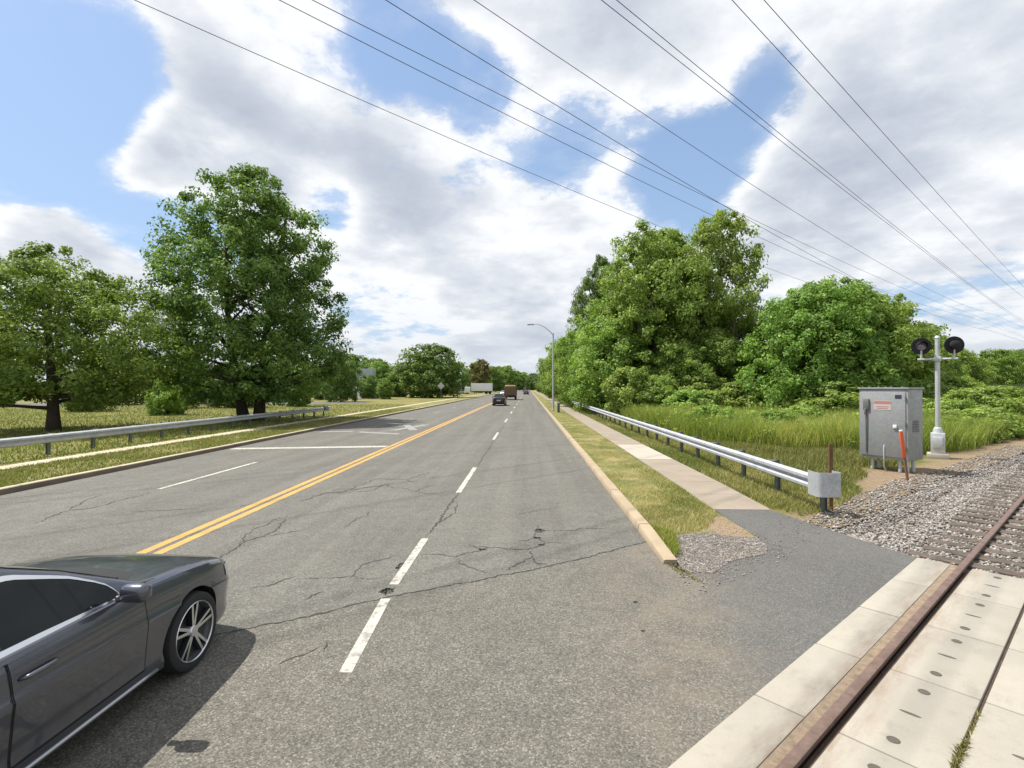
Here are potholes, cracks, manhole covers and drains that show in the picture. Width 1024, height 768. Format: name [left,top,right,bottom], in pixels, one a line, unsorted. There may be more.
crack [439,507,603,572]
crack [254,556,392,598]
crack [41,493,191,522]
crack [219,473,459,558]
